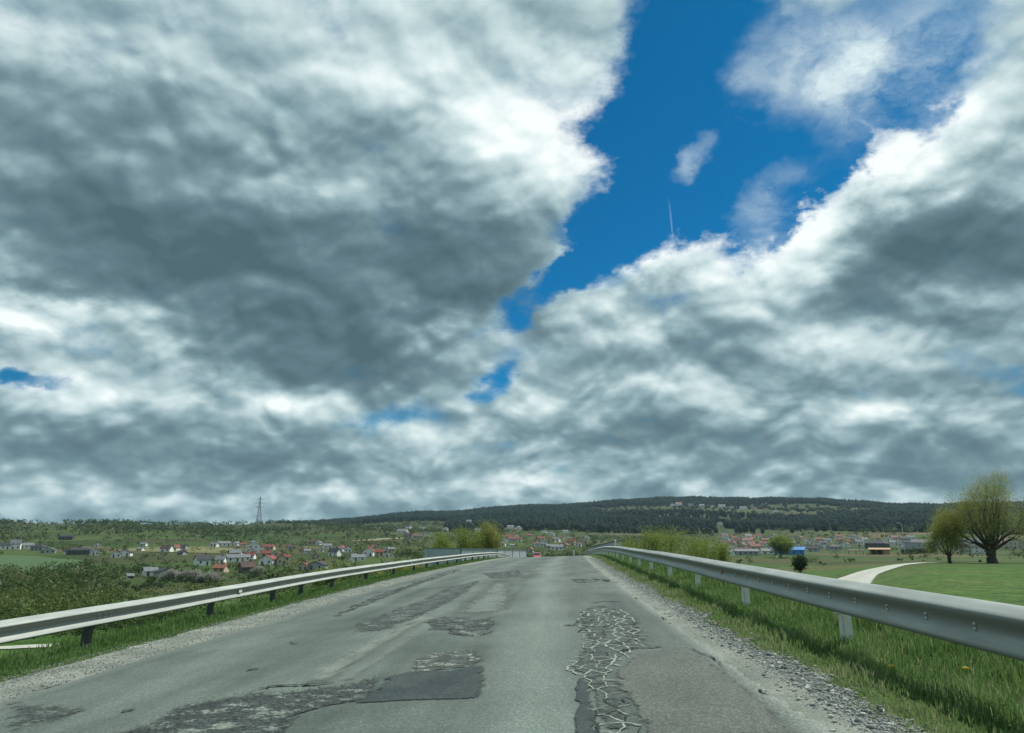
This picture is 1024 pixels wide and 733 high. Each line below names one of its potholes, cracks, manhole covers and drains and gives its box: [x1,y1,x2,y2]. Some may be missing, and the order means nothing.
pothole [121,678,376,733]
crack [566,601,659,733]
pothole [428,616,495,636]
